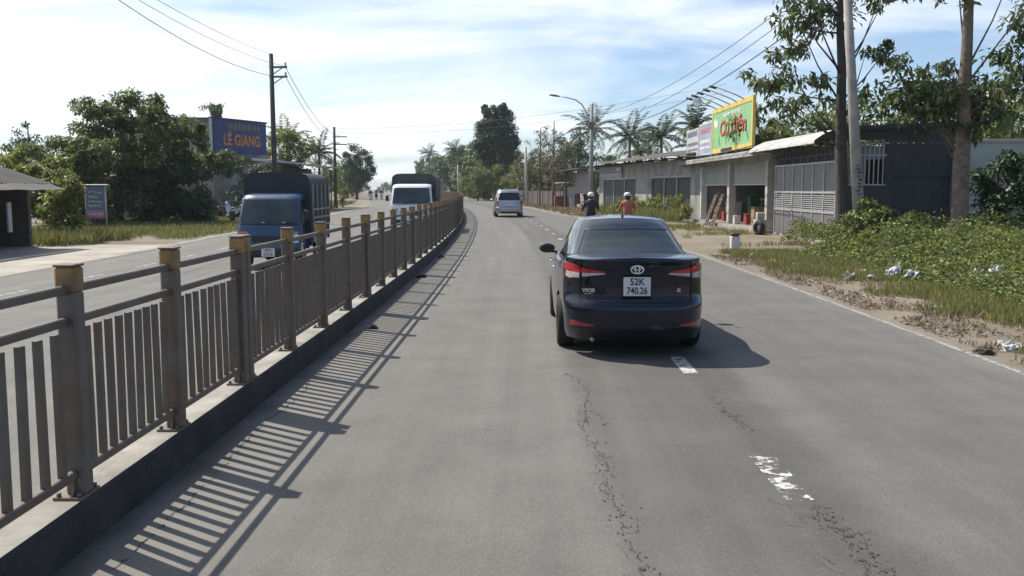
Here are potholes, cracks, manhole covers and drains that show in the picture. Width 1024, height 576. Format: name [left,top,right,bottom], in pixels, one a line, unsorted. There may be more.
crack [707,396,762,453]
crack [562,373,661,576]
crack [769,497,896,576]
